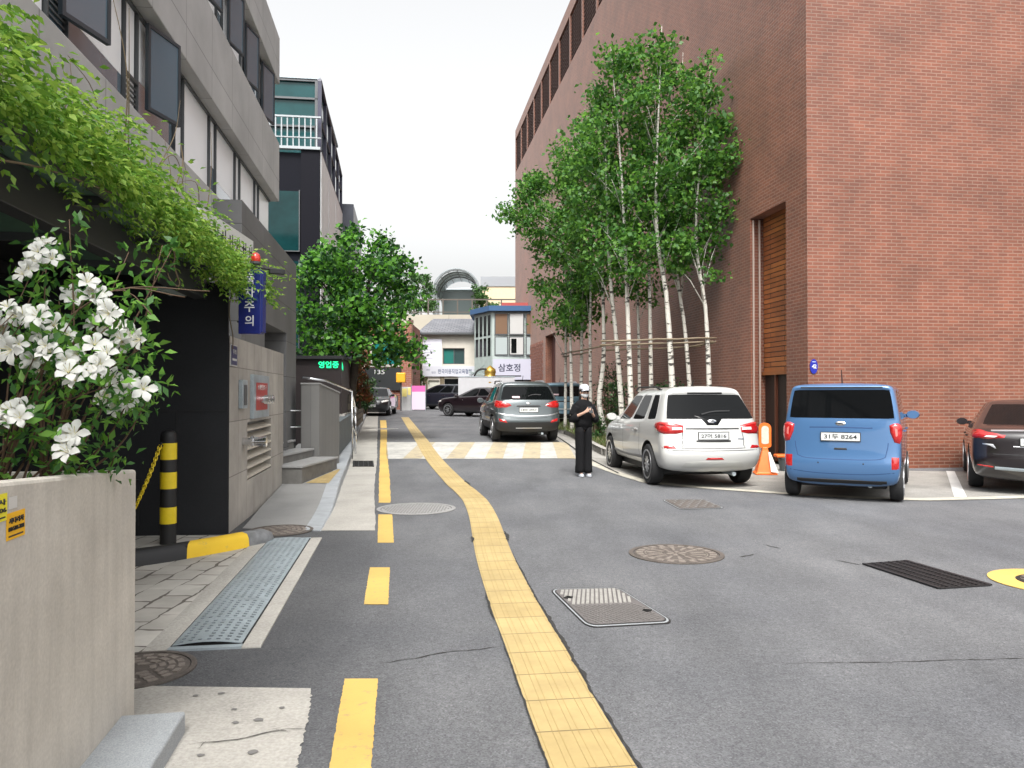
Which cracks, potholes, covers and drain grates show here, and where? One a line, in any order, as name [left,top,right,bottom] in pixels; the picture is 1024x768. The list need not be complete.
crack [193,728,301,748]
manhole cover [377,503,456,515]
drain grate [862,560,992,589]
manhole cover [629,544,725,564]
manhole cover [250,524,313,536]
manhole cover [552,587,671,628]
drain grate [143,537,322,651]
manhole cover [134,650,197,689]
manhole cover [663,499,724,510]
